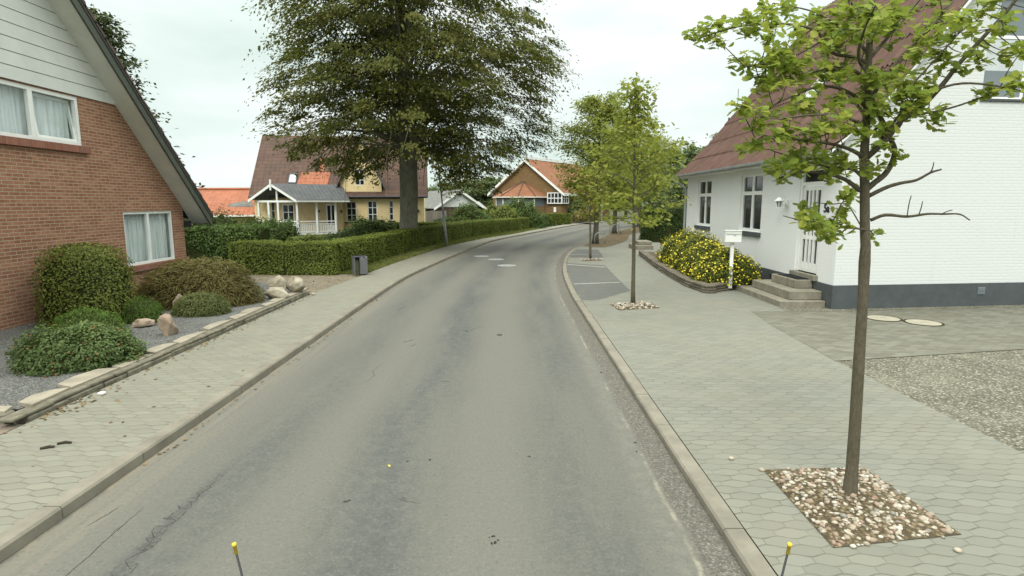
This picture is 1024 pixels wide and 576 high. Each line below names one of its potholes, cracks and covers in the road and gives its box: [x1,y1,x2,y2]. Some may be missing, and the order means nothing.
crack [66,474,222,576]
